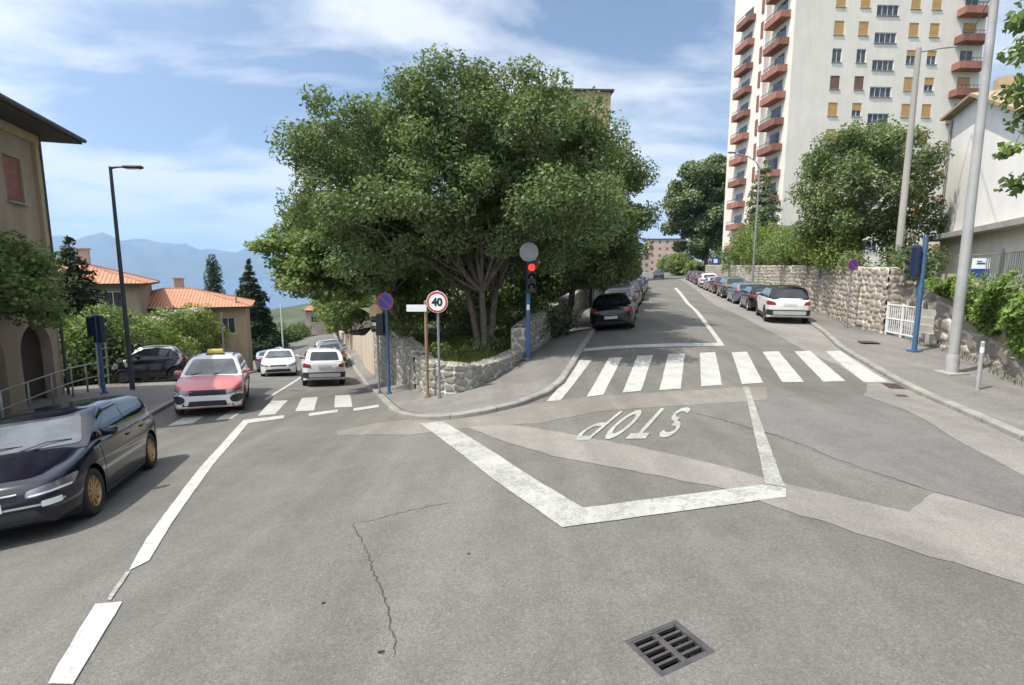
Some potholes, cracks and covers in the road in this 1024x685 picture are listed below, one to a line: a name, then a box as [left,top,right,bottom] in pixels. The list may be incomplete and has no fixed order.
crack [352,504,441,657]
drain grate [624,620,715,677]
